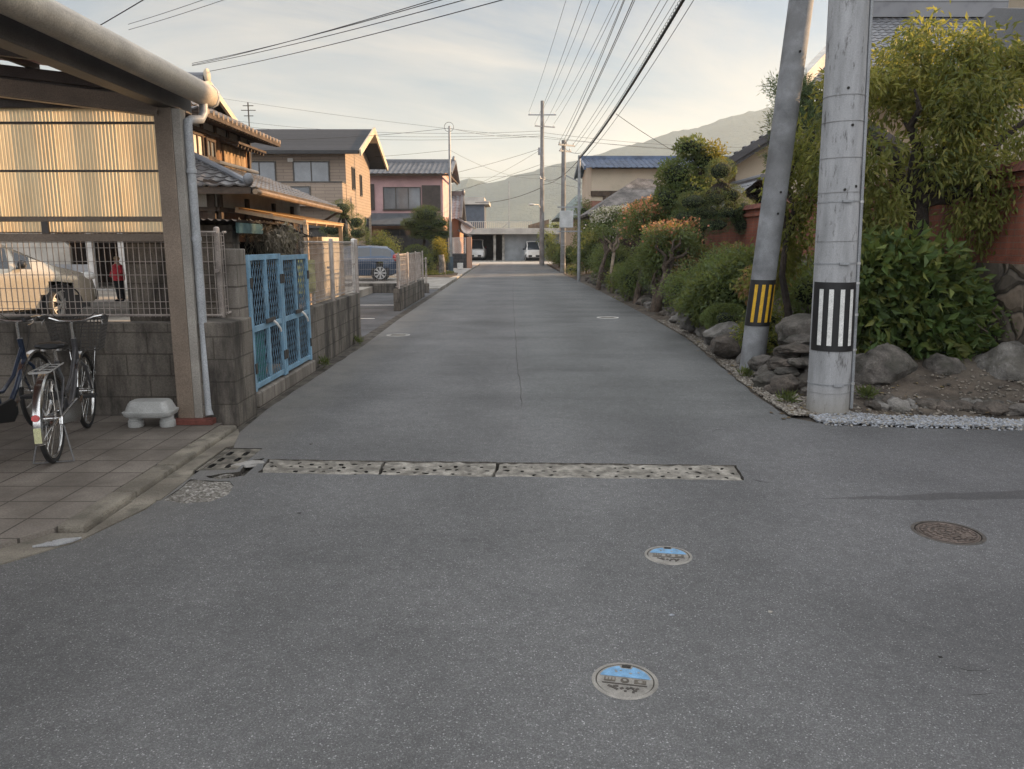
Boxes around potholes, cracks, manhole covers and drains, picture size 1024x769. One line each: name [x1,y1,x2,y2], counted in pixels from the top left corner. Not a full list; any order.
manhole cover [910,521,987,545]
drain grate [196,448,261,471]
manhole cover [644,546,692,565]
manhole cover [592,663,658,700]
